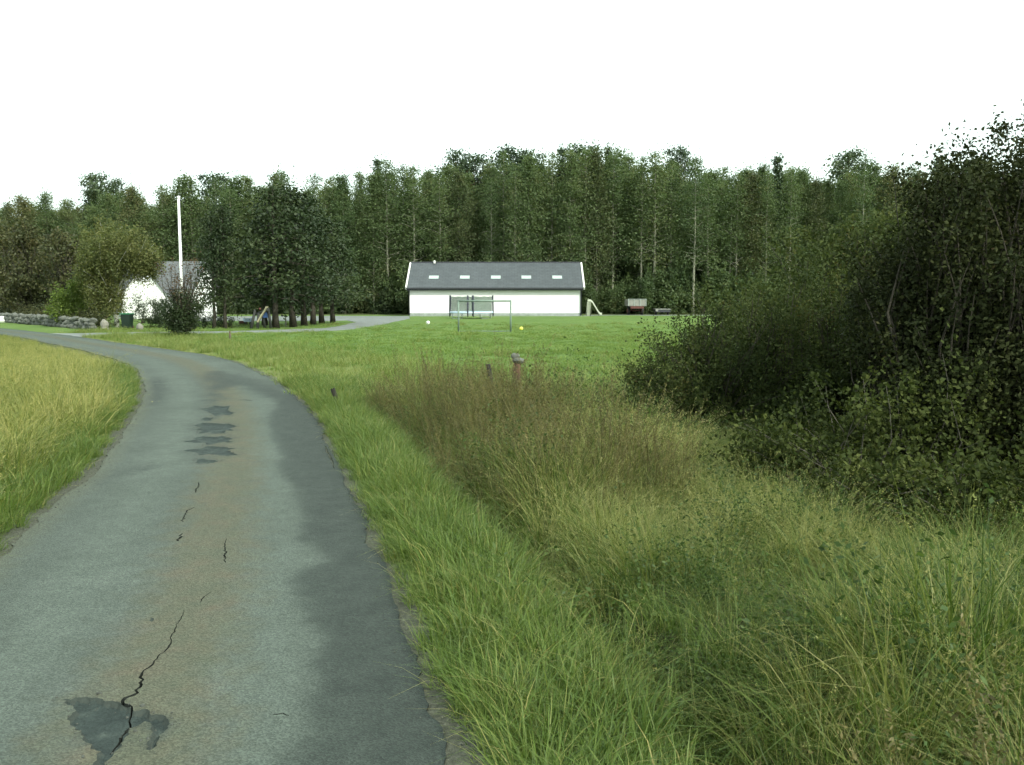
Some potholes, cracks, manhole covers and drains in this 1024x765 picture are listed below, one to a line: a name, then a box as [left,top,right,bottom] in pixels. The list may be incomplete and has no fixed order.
crack [110,592,210,755]
